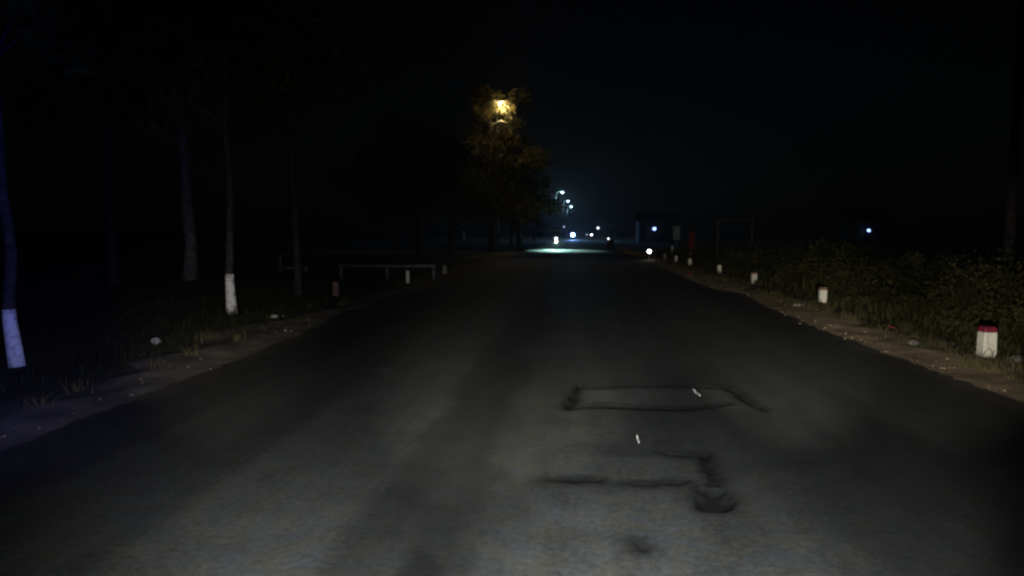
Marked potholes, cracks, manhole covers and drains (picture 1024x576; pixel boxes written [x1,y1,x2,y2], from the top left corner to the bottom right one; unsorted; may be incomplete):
pothole [694,487,738,513]
pothole [631,540,651,553]
